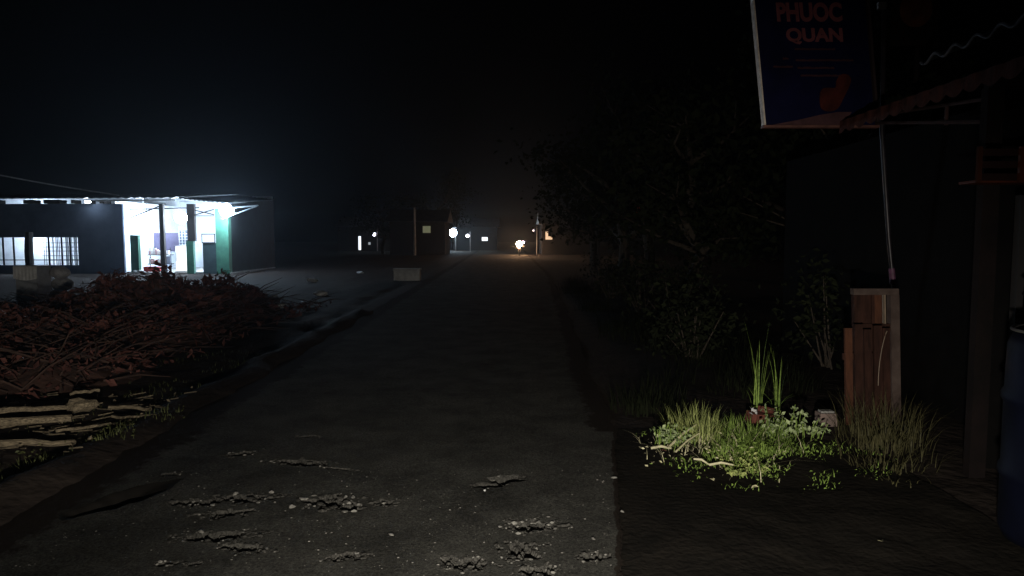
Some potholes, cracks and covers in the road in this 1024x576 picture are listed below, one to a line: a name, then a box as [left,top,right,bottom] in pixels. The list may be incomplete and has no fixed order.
pothole [468,474,531,489]
pothole [493,514,573,536]
pothole [491,539,561,576]
pothole [168,490,281,521]
pothole [258,456,360,472]
pothole [436,552,505,574]
pothole [210,448,270,460]
pothole [289,492,369,513]
pothole [574,551,612,564]
pothole [154,528,279,556]
